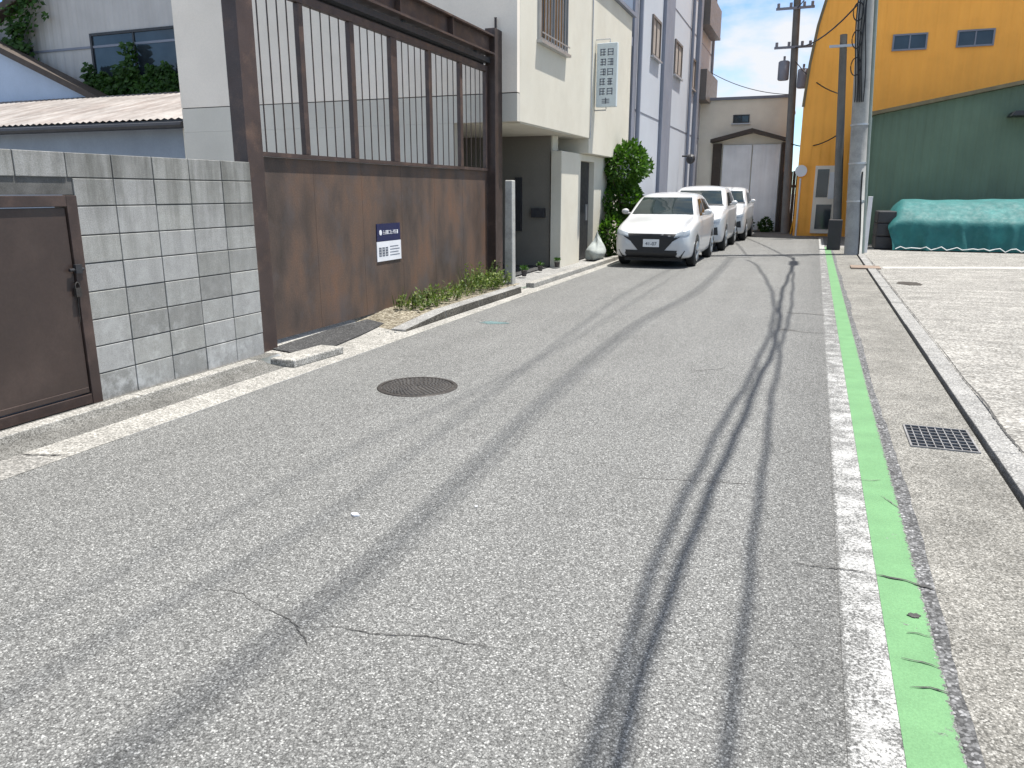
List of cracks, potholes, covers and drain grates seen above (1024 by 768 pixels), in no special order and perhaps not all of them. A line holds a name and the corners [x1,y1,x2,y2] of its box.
crack [910,686,954,694]
drain grate [903,424,981,454]
crack [202,588,511,650]
manhole cover [377,377,458,397]
crack [799,562,945,593]
